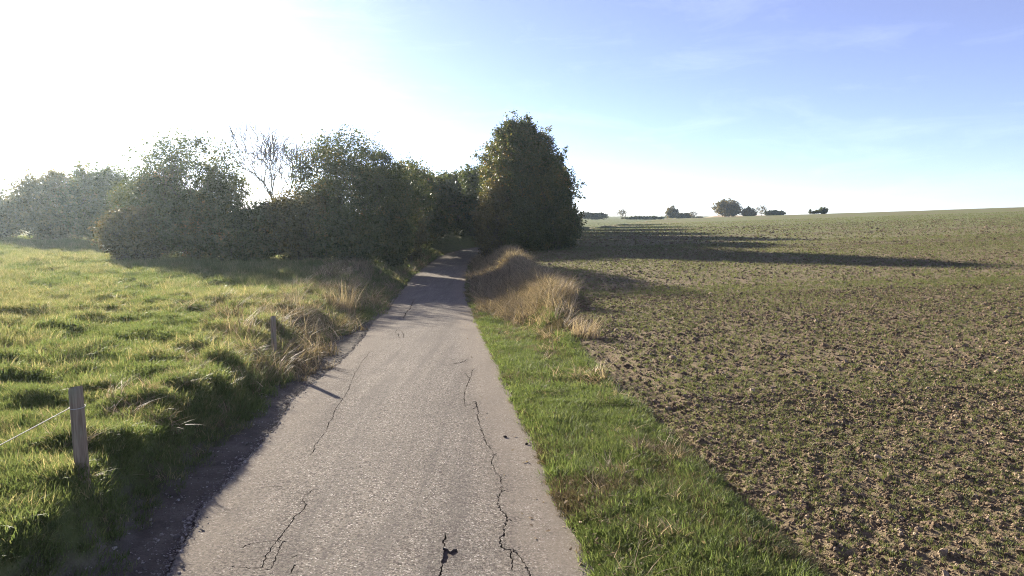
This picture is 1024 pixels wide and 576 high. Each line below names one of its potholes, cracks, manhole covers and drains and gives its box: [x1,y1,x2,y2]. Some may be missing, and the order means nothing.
crack [229,485,314,572]
crack [311,353,369,454]
crack [454,360,531,576]
